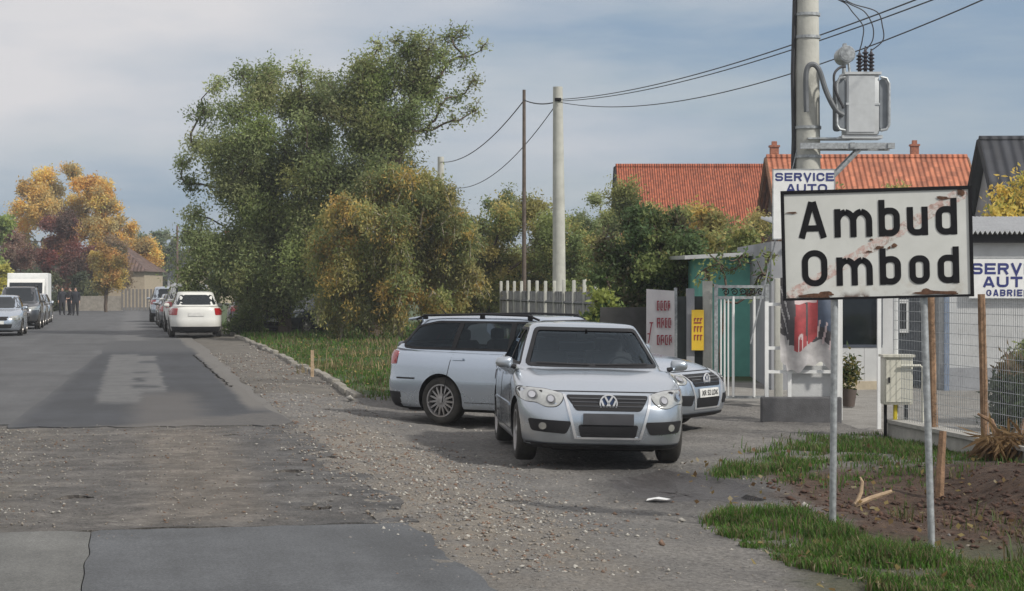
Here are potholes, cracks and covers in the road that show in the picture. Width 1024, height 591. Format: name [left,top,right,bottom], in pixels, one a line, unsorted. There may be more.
pothole [606,469,767,502]
